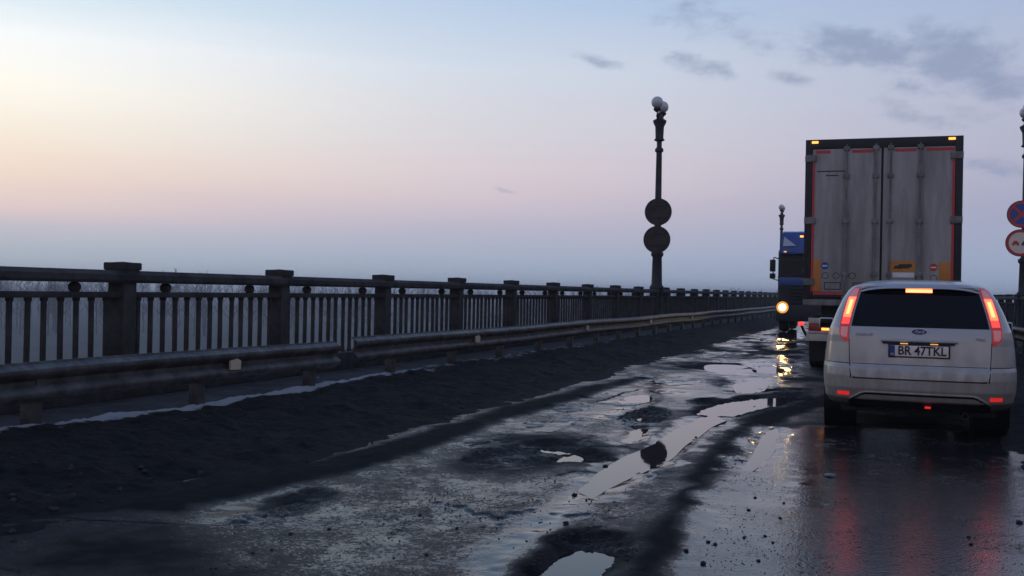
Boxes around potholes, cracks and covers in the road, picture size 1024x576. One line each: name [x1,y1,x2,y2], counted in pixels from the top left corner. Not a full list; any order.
pothole [617,406,670,429]
pothole [512,529,646,576]
pothole [668,362,760,370]
pothole [224,488,342,525]
pothole [459,438,618,470]
